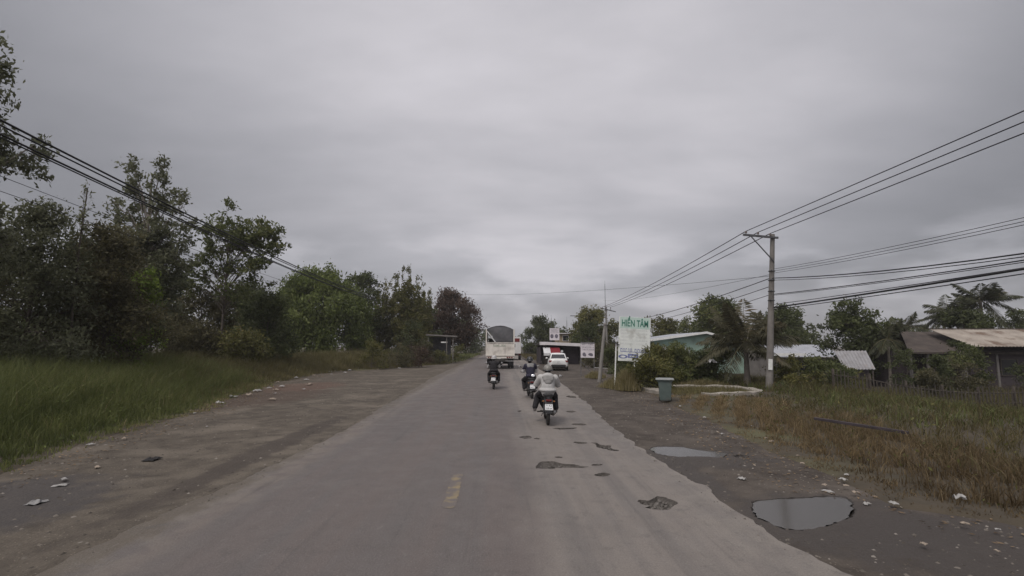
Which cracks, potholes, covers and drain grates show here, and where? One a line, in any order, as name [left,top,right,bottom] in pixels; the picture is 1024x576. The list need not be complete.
pothole [535,461,584,469]
pothole [750,495,856,531]
pothole [649,446,729,457]
pothole [638,496,678,510]
